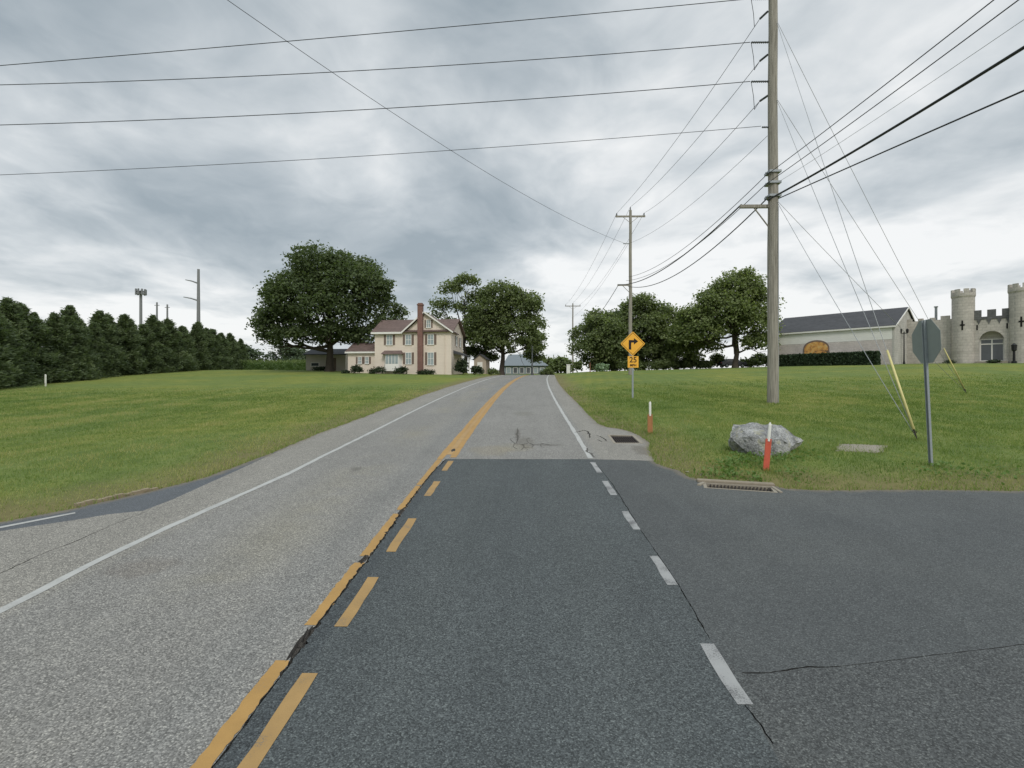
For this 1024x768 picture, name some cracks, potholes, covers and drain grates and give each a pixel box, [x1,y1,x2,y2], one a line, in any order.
crack [743,644,1024,673]
drain grate [608,435,643,443]
drain grate [697,478,783,493]
